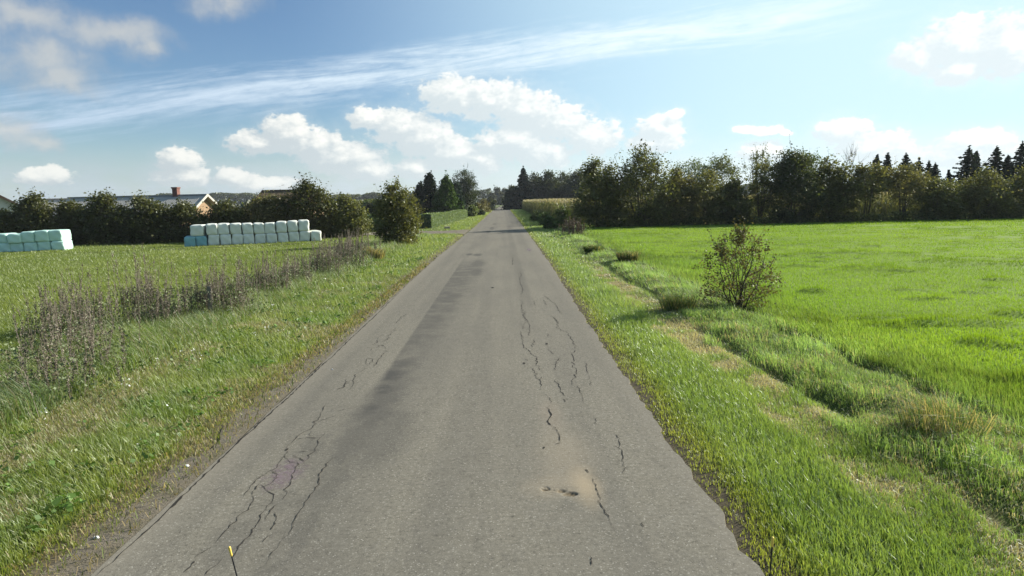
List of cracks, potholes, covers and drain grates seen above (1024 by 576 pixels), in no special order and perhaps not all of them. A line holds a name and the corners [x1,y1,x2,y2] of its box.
crack [512,260,594,444]
crack [184,407,349,574]
crack [337,313,408,390]
pothole [536,481,587,504]
